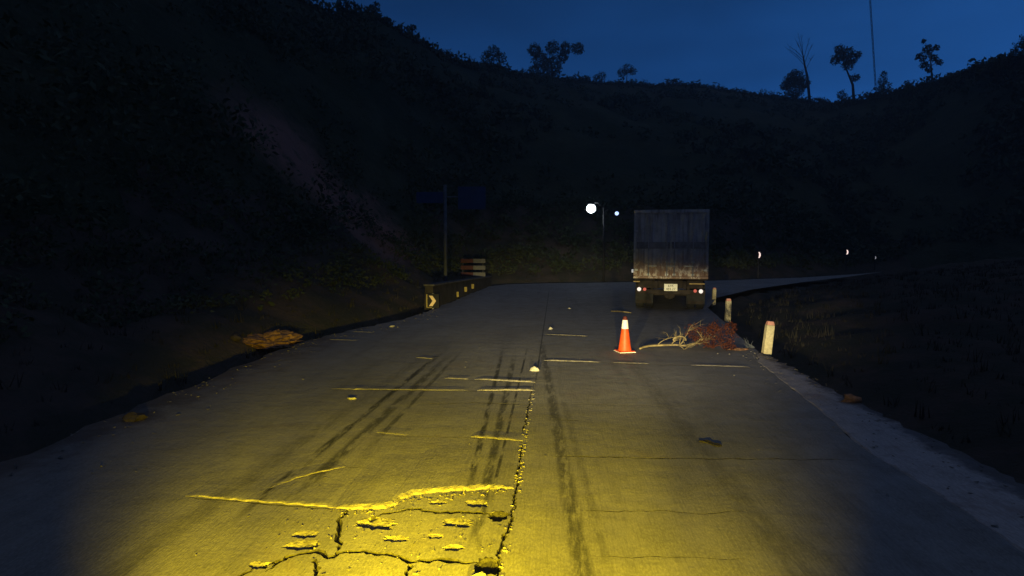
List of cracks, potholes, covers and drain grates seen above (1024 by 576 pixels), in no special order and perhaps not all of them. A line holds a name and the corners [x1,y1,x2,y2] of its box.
crack [186,355,752,576]
